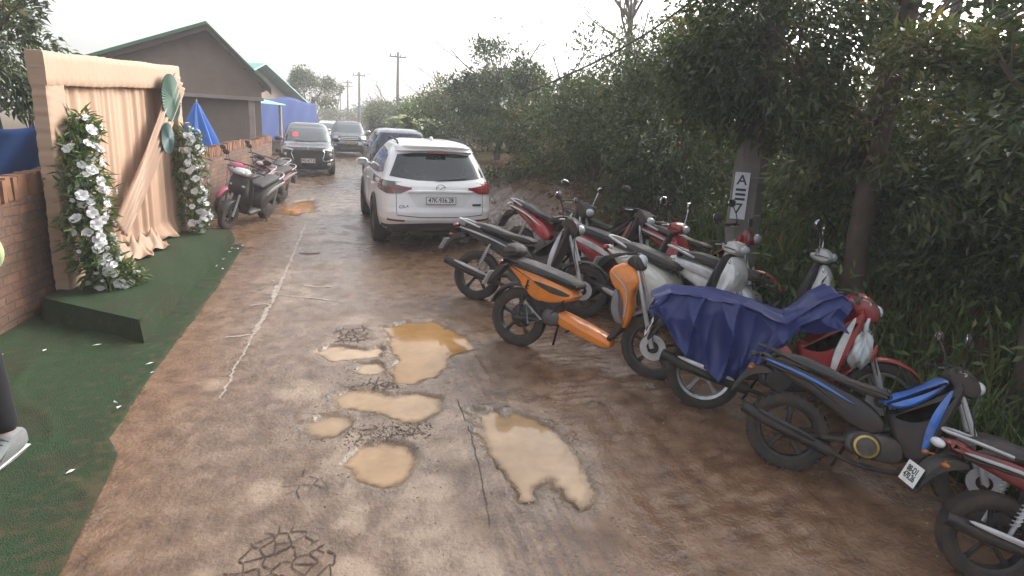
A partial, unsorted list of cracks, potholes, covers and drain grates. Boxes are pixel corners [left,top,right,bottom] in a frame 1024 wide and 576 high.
pothole [373,318,481,387]
pothole [334,435,427,494]
pothole [272,198,324,217]
pothole [463,403,608,516]
crack [351,376,400,390]
crack [335,325,372,343]
pothole [289,409,360,446]
pothole [346,358,393,378]
crack [223,525,346,576]
crack [218,225,343,399]
crack [355,422,424,442]
pothole [308,342,387,363]
